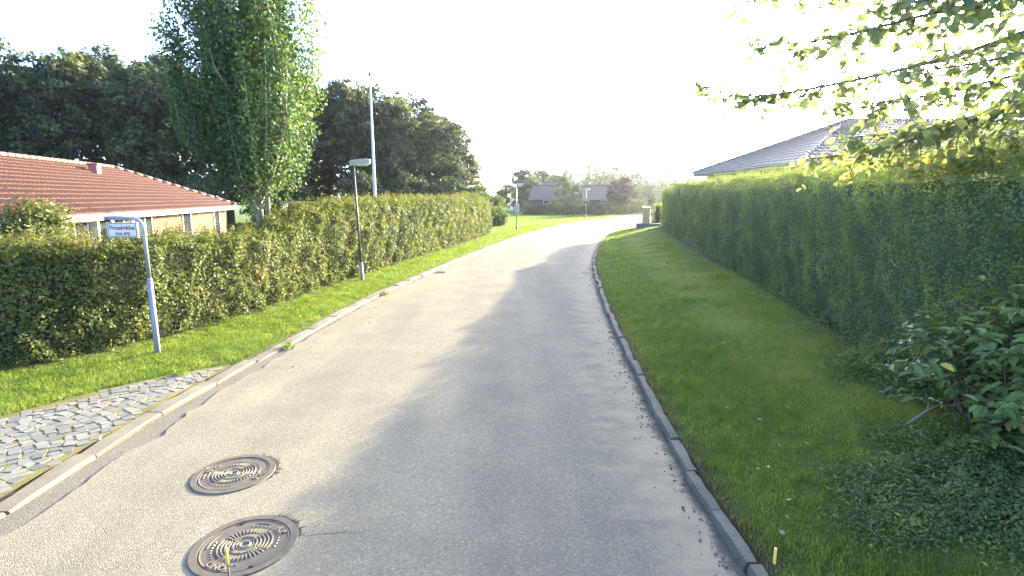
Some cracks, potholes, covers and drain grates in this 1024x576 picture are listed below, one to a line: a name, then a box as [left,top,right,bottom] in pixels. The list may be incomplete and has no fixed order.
manhole cover [190,455,276,495]
crack [276,512,369,537]
manhole cover [187,515,299,576]
